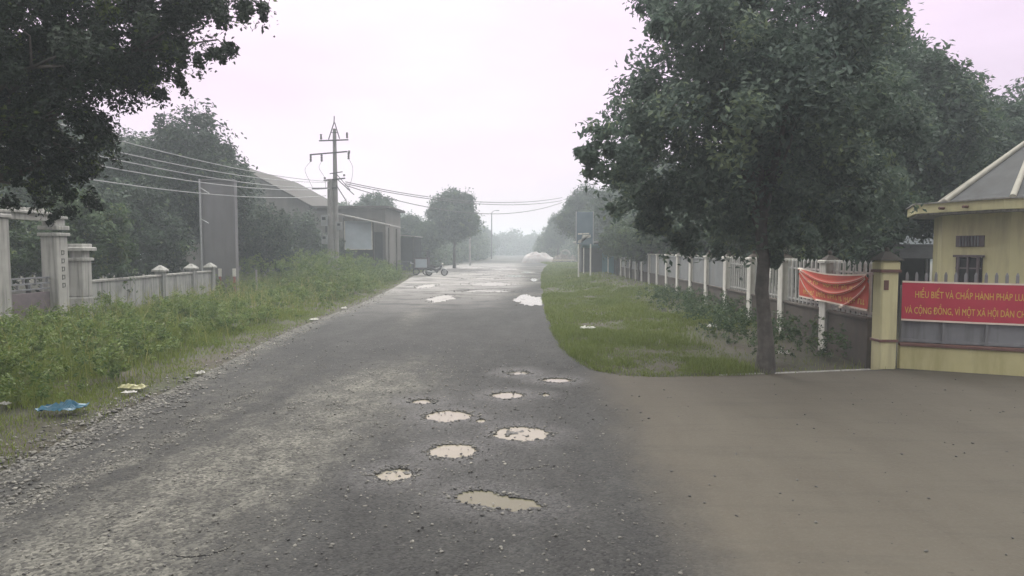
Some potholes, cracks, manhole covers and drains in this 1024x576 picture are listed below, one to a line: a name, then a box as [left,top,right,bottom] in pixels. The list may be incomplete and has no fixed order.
pothole [502,368,534,376]
pothole [416,408,481,425]
pothole [443,486,548,516]
pothole [406,397,439,406]
pothole [418,441,485,462]
crack [166,544,233,558]
pothole [484,423,561,442]
pothole [484,390,533,400]
pothole [536,376,579,384]
pothole [497,294,544,306]
pothole [421,295,473,303]
pothole [361,464,428,485]
